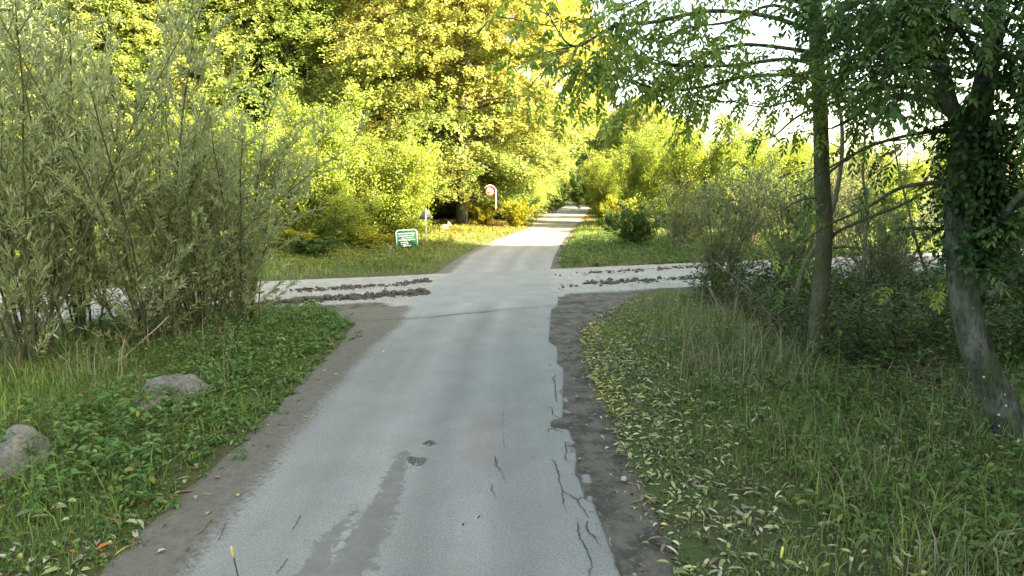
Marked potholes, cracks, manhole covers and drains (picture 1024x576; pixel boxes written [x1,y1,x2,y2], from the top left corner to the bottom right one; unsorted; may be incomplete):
pothole [418,439,439,448]
crack [548,374,609,575]
pothole [403,455,431,469]
